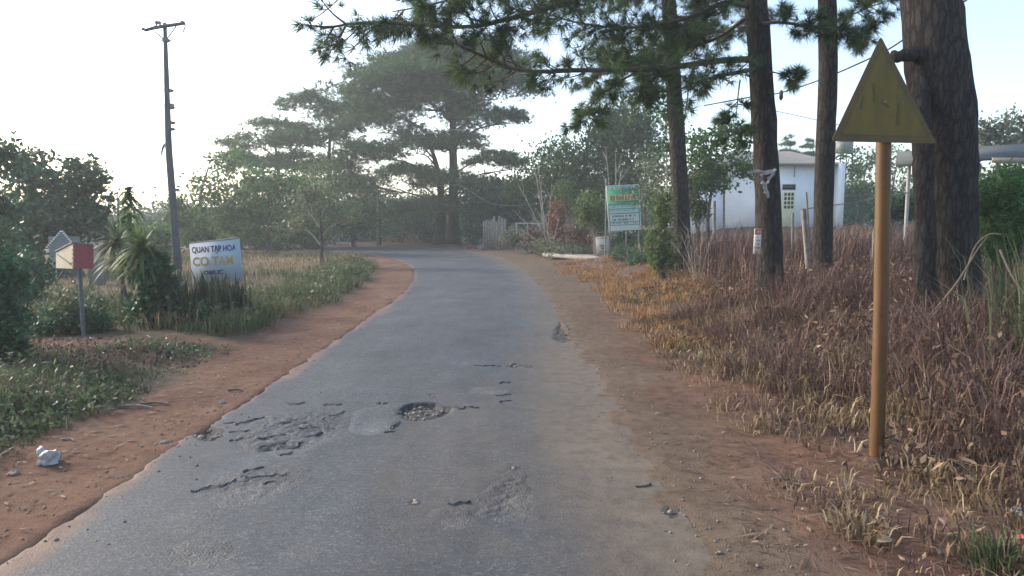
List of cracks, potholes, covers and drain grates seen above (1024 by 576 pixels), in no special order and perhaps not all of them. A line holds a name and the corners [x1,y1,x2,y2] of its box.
pothole [396,401,453,422]
crack [453,365,511,410]
pothole [551,311,573,343]
pothole [192,427,225,442]
crack [190,402,345,493]
